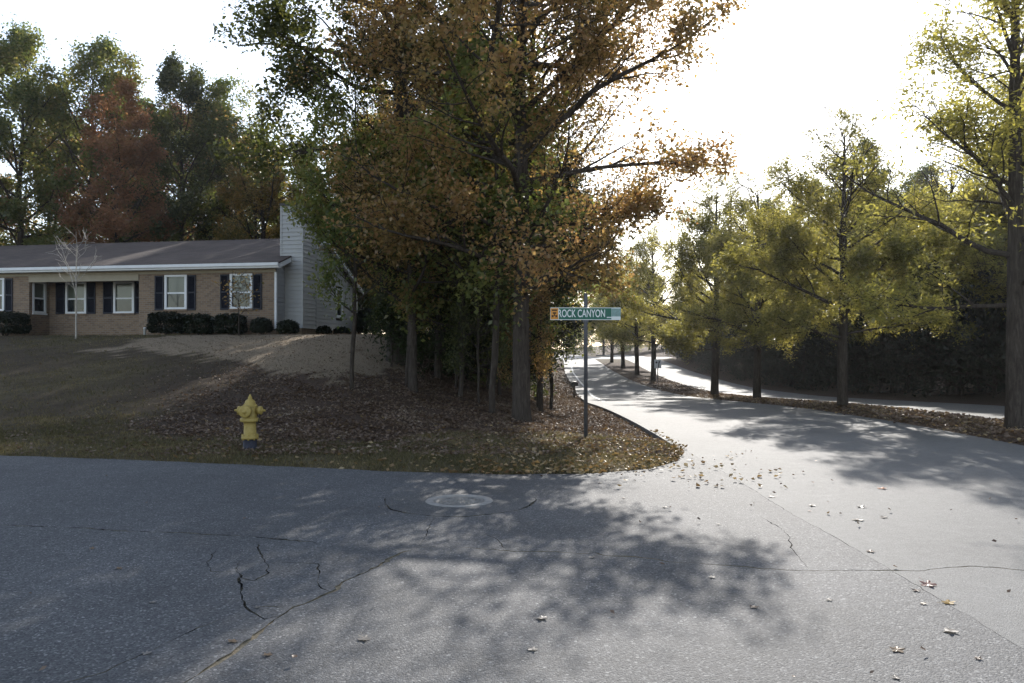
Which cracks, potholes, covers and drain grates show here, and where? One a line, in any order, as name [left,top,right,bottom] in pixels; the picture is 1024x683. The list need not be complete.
manhole cover [425,494,493,507]
crack [14,498,1024,683]
